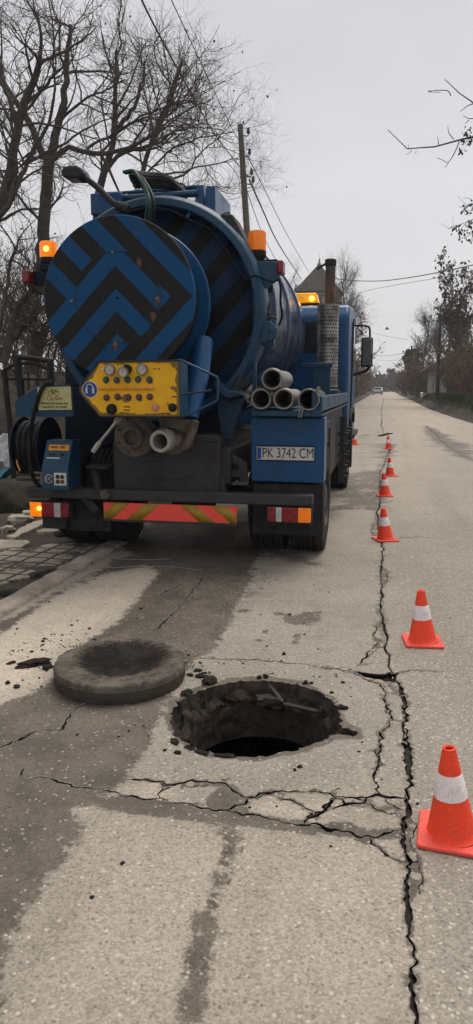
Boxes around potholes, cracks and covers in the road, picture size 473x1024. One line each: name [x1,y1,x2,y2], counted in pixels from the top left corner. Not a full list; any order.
crack [0,704,82,748]
manhole cover [53,638,185,705]
crack [19,400,435,1024]
